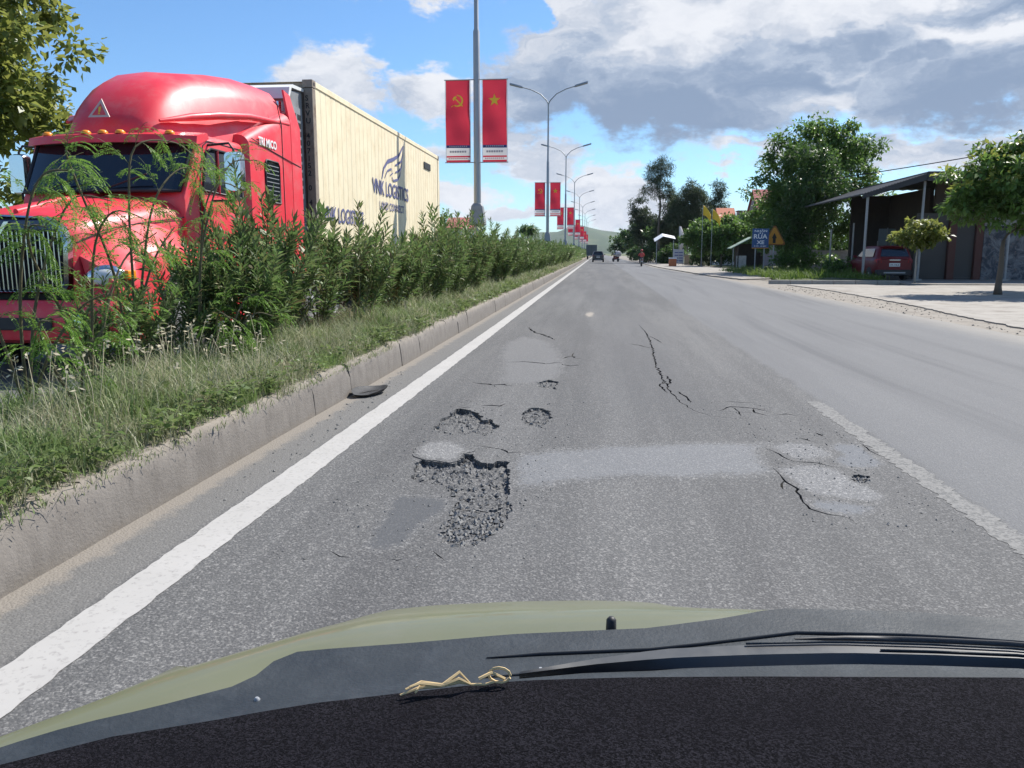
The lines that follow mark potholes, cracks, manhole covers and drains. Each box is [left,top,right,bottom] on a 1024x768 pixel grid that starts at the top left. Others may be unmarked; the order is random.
pothole [537,380,559,389]
pothole [437,501,513,547]
crack [766,433,857,524]
pothole [851,474,872,483]
crack [720,401,792,415]
pothole [521,408,553,428]
pothole [434,408,500,436]
crack [634,328,743,419]
pothole [411,454,511,512]
crack [521,327,576,366]
